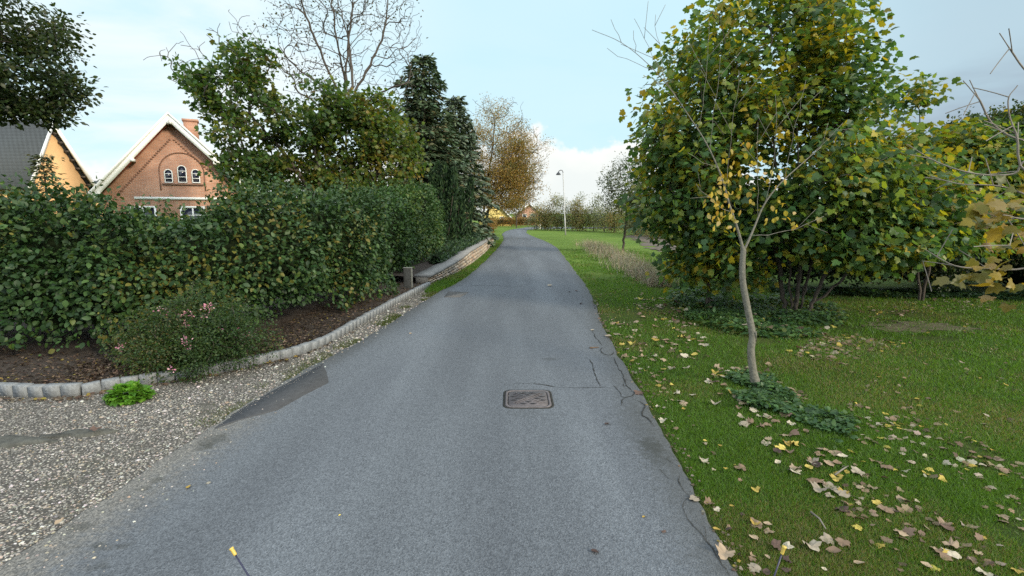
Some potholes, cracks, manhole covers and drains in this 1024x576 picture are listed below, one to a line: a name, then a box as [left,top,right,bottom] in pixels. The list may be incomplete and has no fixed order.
crack [660,459,730,575]
crack [517,334,652,423]
manhole cover [503,390,554,409]
